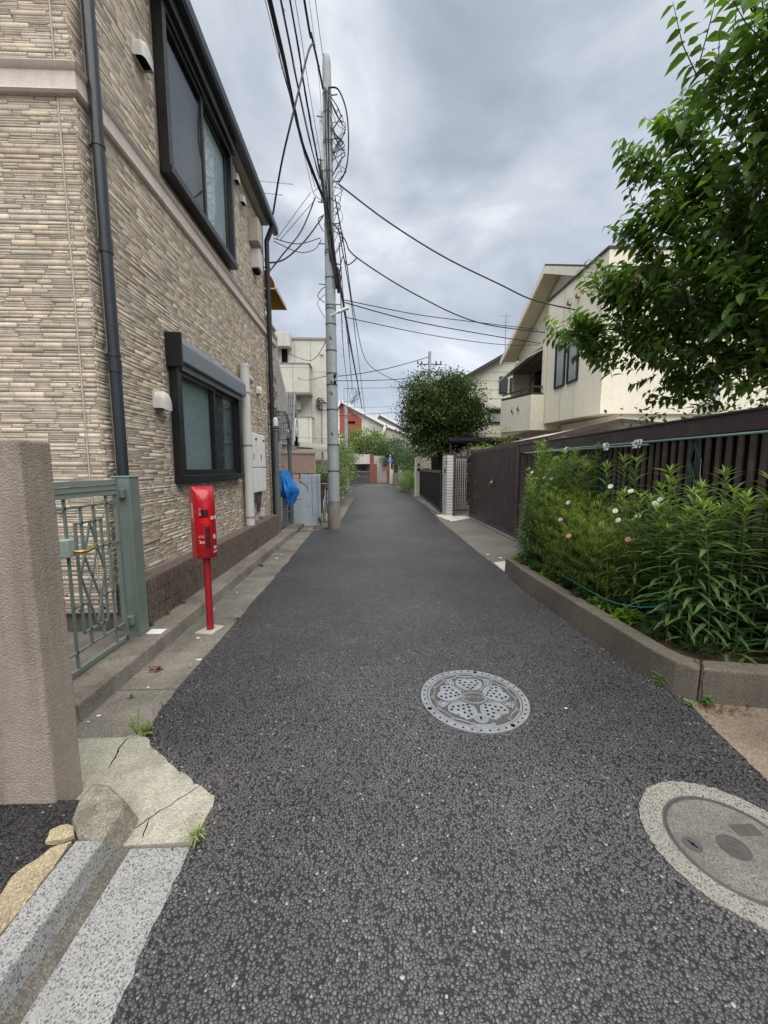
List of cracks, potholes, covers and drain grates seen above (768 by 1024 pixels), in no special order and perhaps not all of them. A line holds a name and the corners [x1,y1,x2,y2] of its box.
manhole cover [638,781,768,932]
crack [136,783,202,838]
manhole cover [421,670,530,735]
